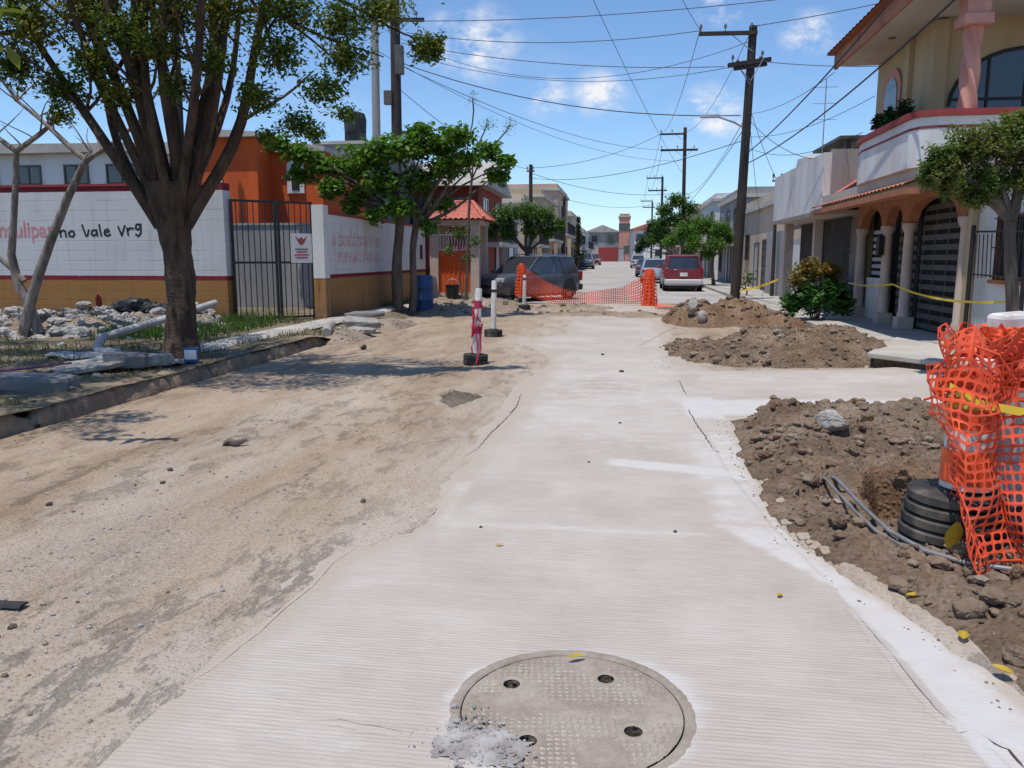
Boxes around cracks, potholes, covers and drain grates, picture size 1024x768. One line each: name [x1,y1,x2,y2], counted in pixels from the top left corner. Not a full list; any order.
crack [414,393,524,459]
manhole cover [448,650,697,768]
crack [677,380,720,452]
crack [309,715,415,738]
